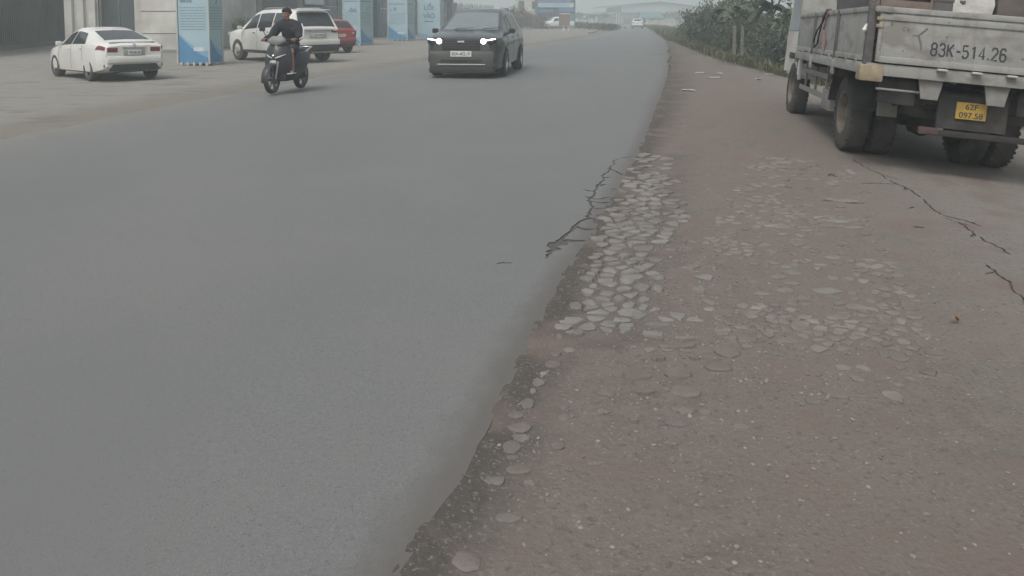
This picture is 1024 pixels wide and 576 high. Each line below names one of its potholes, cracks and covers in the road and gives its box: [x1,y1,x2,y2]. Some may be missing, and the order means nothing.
crack [452,153,945,573]
crack [854,160,1024,304]
